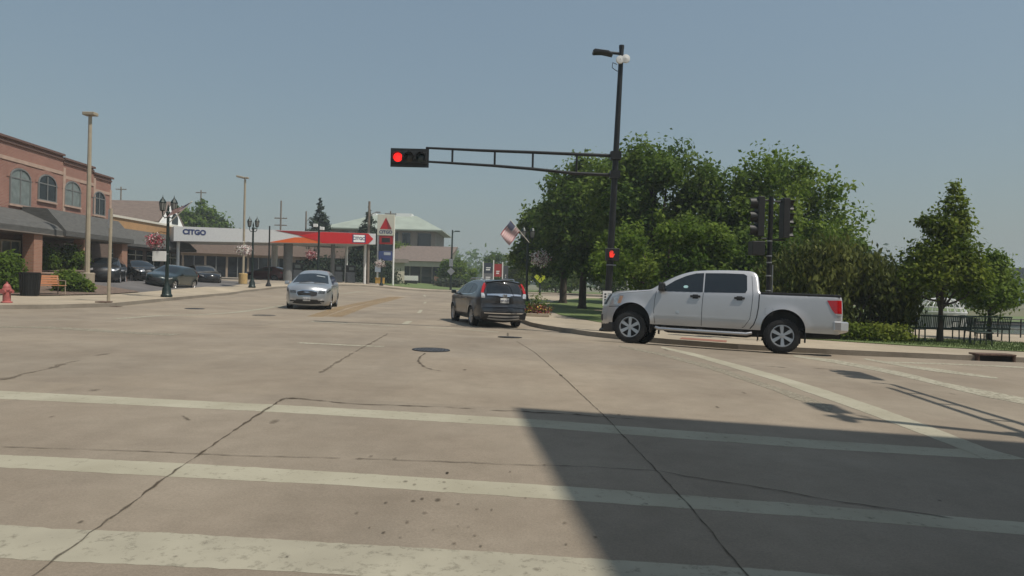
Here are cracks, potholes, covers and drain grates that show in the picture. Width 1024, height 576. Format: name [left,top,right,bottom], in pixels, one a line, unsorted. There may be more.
drain grate [969,352,1017,362]
